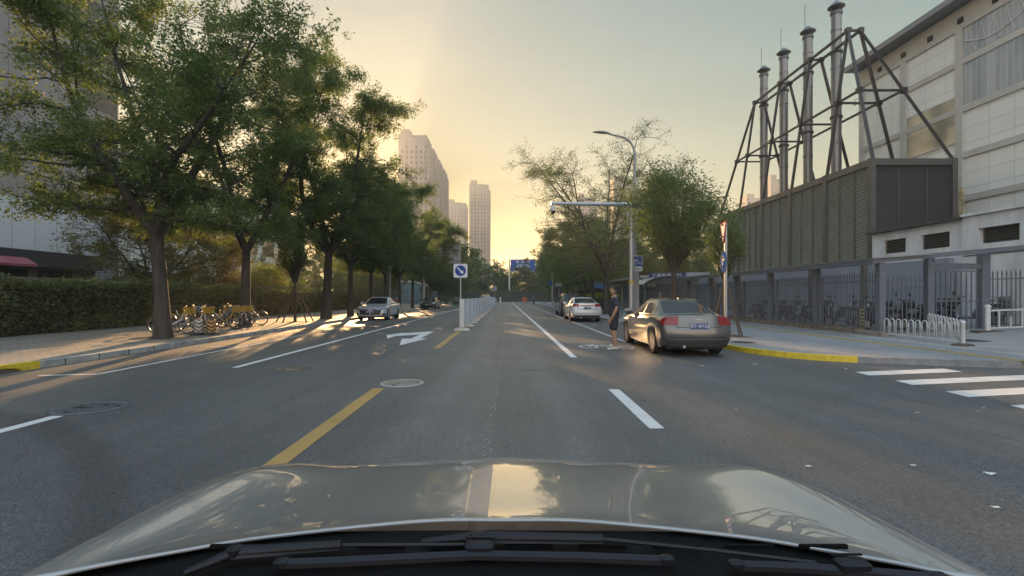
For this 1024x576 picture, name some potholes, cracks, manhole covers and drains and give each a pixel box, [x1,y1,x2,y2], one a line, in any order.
manhole cover [44,401,133,416]
manhole cover [380,379,424,387]
